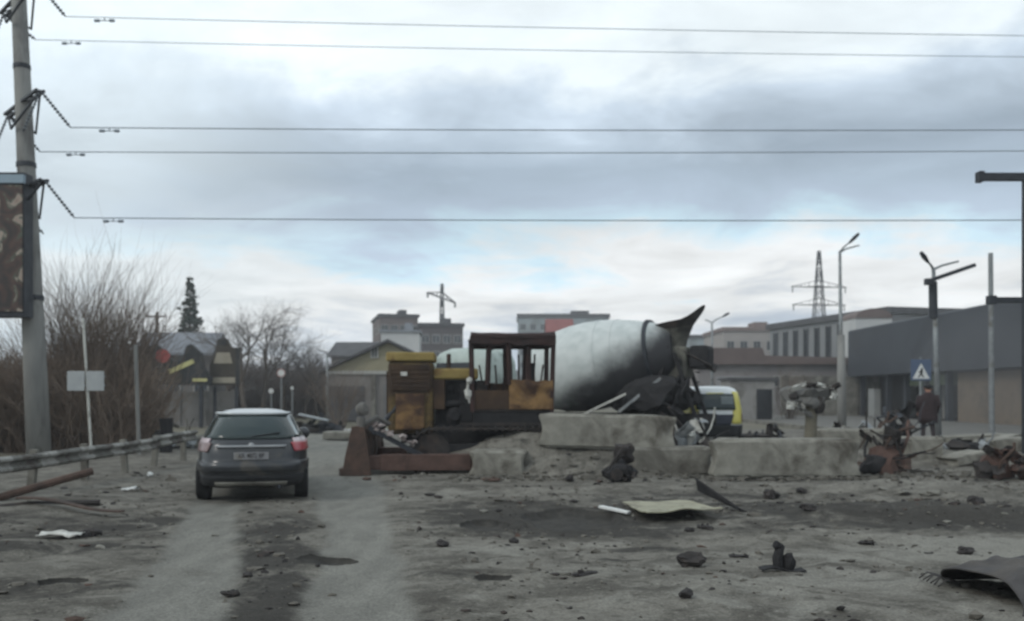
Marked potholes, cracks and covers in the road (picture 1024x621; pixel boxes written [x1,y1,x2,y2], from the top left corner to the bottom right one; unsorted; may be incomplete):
pothole [21,575,105,588]
pothole [283,553,373,568]
